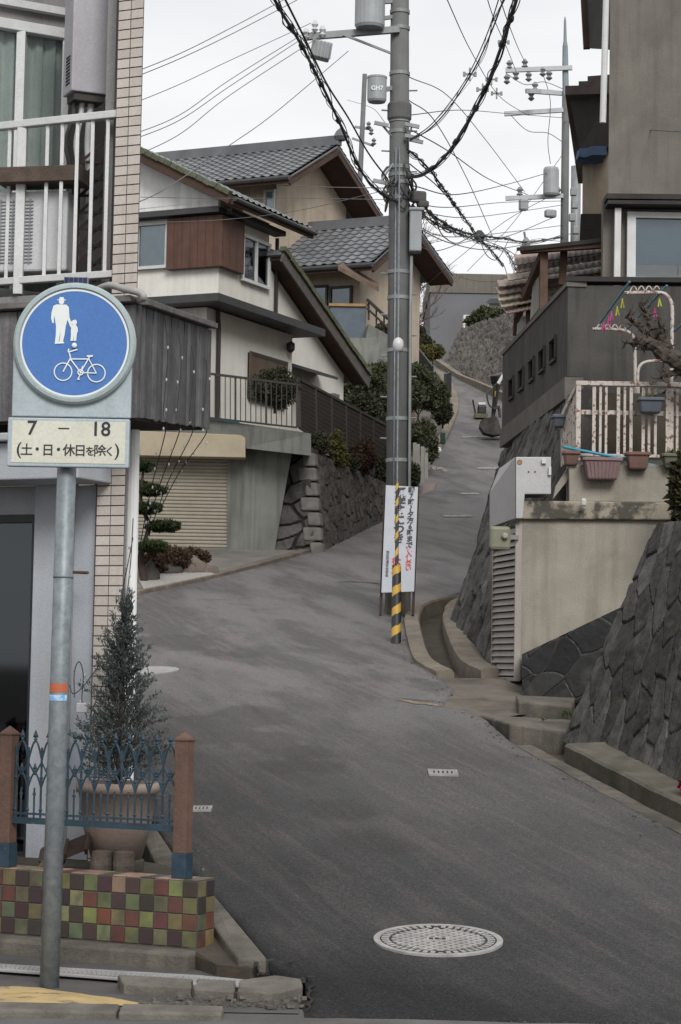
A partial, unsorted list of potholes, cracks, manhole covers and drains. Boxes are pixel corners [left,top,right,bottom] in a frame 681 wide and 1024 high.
manhole cover [137,666,179,675]
manhole cover [373,924,503,957]
